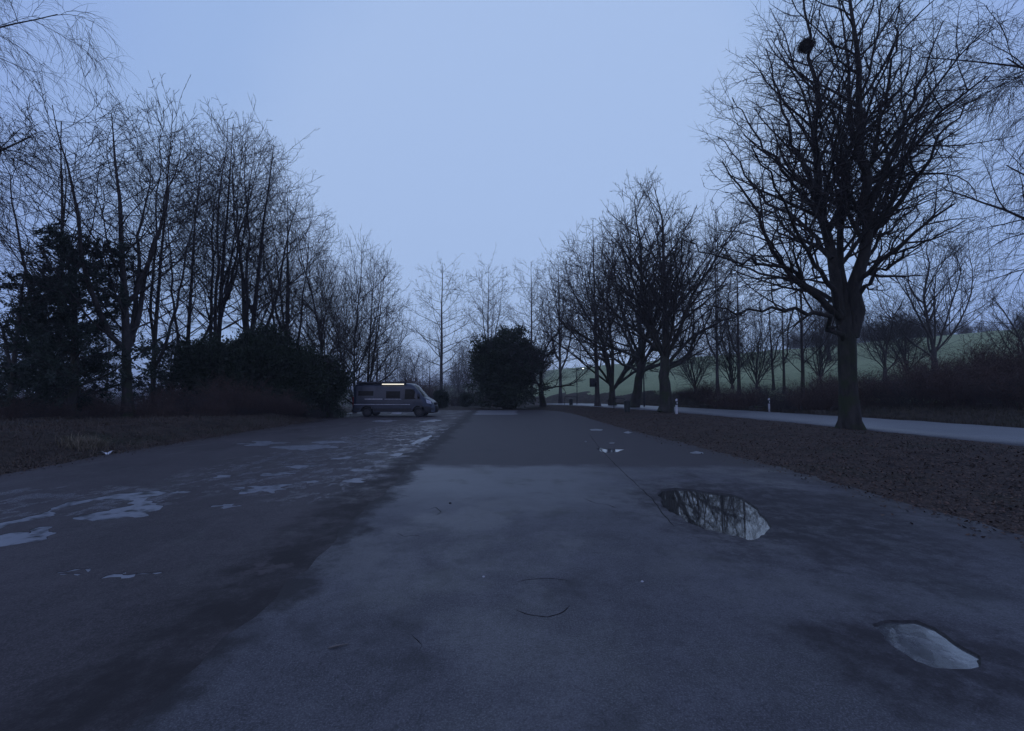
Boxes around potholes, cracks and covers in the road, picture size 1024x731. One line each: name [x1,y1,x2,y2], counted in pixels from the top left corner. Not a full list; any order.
crack [591,437,673,525]
pothole [657,488,772,540]
pothole [872,620,982,669]
